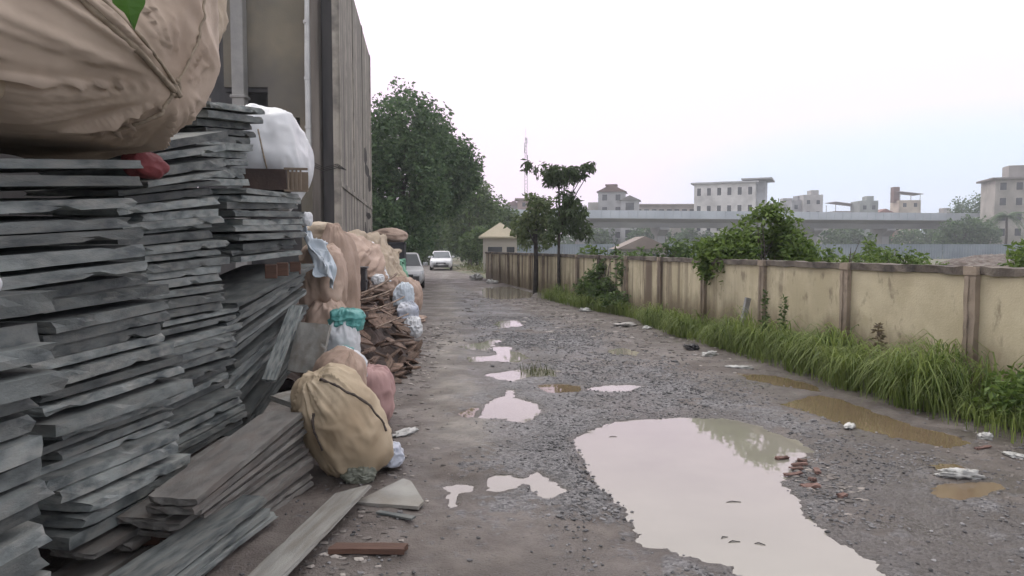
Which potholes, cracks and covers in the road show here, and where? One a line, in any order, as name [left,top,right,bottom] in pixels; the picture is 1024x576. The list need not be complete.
pothole [774,393,975,450]
pothole [533,382,588,393]
pothole [568,416,903,576]
pothole [586,383,645,392]
pothole [462,345,533,363]
pothole [479,469,574,499]
pothole [921,480,1015,501]
pothole [475,388,547,423]
pothole [482,366,560,382]
pothole [436,480,485,509]
pothole [730,371,825,392]
pothole [491,319,527,328]
